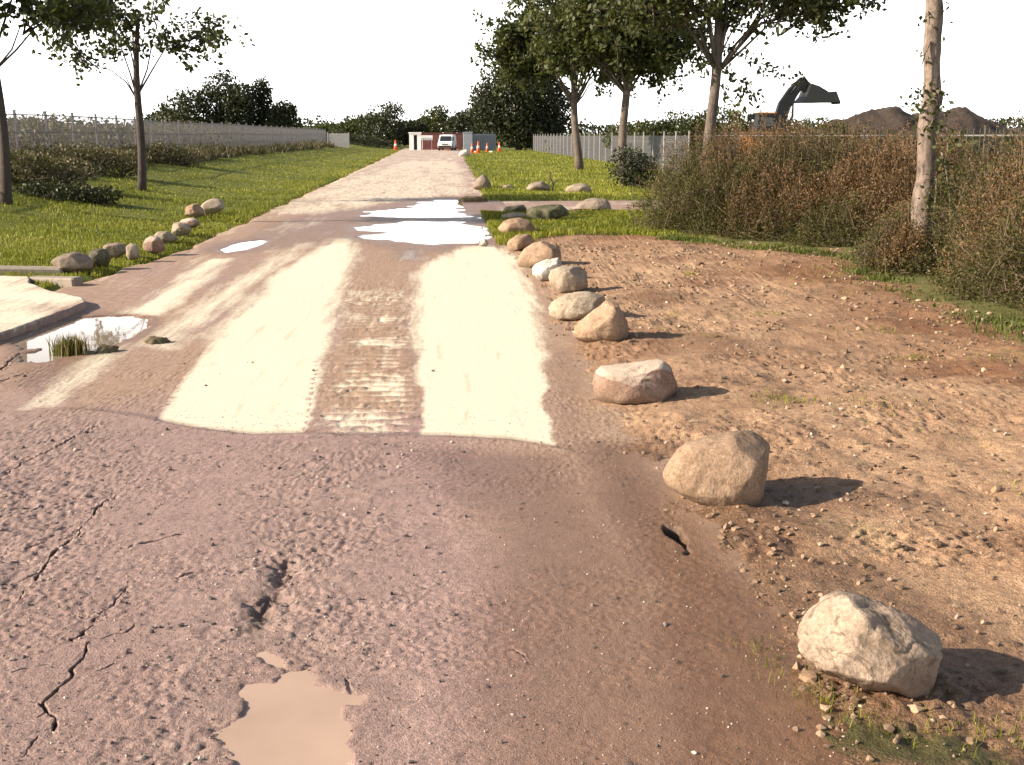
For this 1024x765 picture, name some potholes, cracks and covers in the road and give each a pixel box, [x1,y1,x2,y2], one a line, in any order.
pothole [192,639,378,765]
crack [0,493,195,765]
pothole [221,553,321,639]
pothole [7,314,156,364]
pothole [657,523,697,557]
